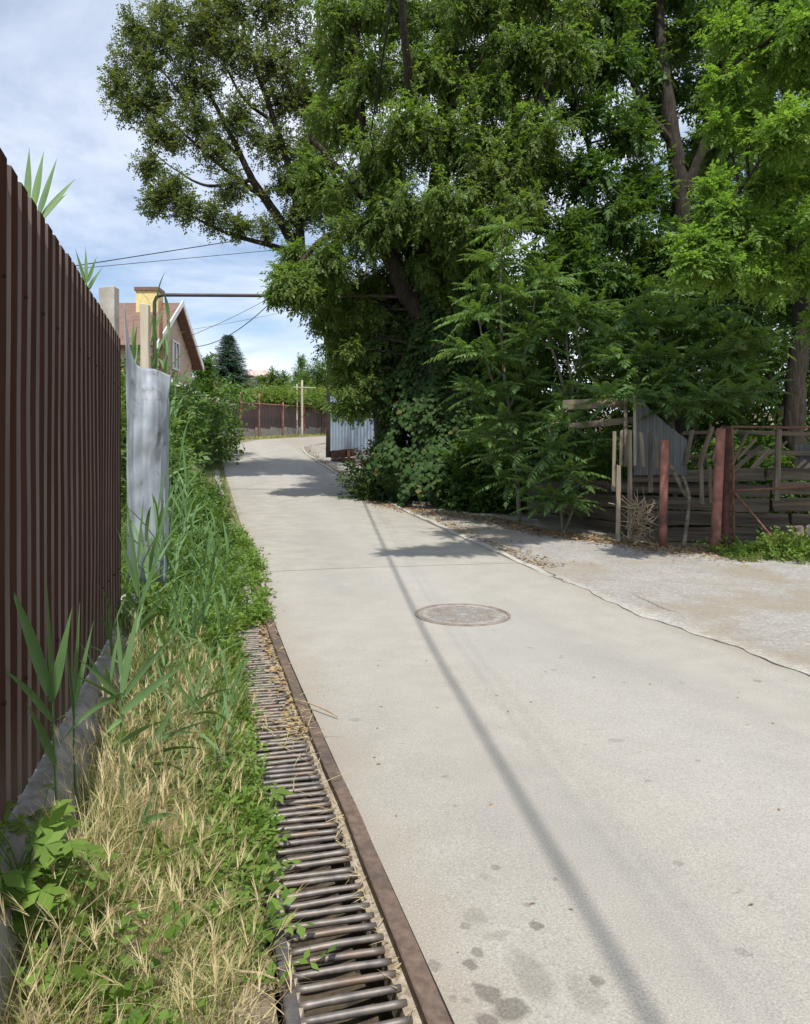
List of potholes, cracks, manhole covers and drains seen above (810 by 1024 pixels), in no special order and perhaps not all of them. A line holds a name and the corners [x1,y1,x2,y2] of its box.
drain grate [234,620,314,730]
manhole cover [415,603,511,626]
drain grate [248,720,452,1024]
